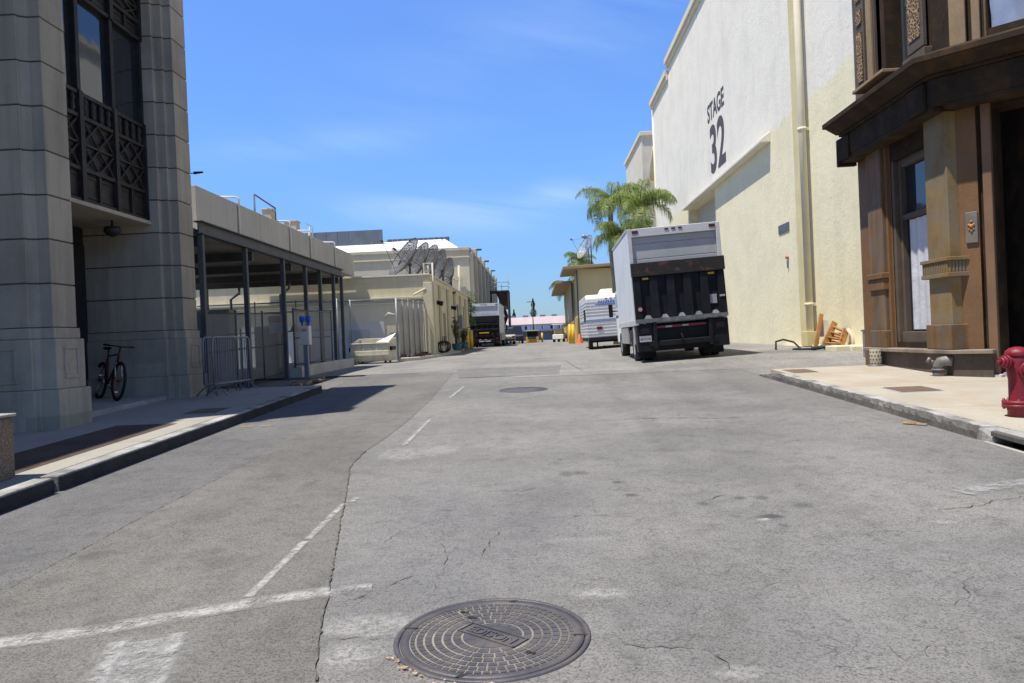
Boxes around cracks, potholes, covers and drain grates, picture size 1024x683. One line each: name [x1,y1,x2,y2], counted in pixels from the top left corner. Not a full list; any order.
manhole cover [393,598,591,683]
crack [610,633,729,677]
utility cover [181,407,232,415]
